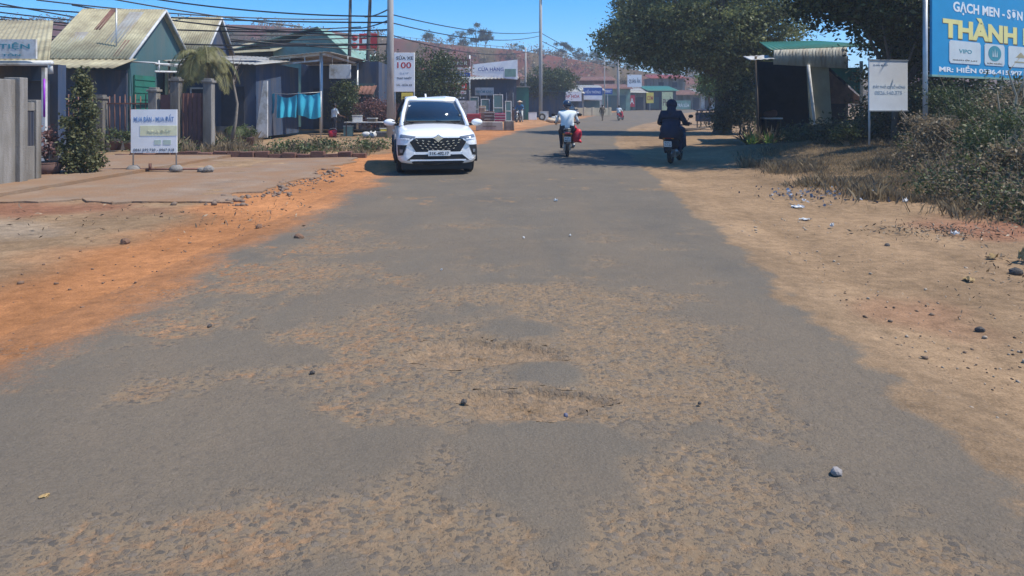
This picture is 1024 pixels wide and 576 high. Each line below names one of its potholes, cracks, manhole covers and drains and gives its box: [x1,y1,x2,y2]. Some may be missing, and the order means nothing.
pothole [397,337,574,371]
pothole [444,384,623,422]
